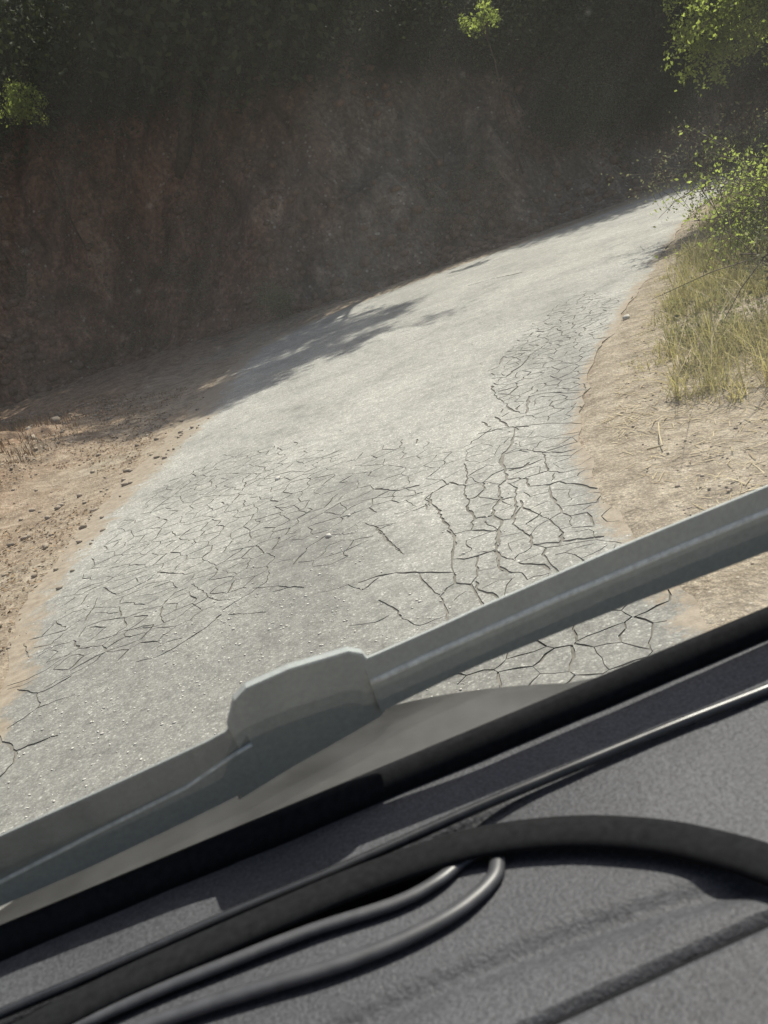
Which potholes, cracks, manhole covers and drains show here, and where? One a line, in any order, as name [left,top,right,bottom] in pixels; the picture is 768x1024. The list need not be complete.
crack [0,291,672,777]
